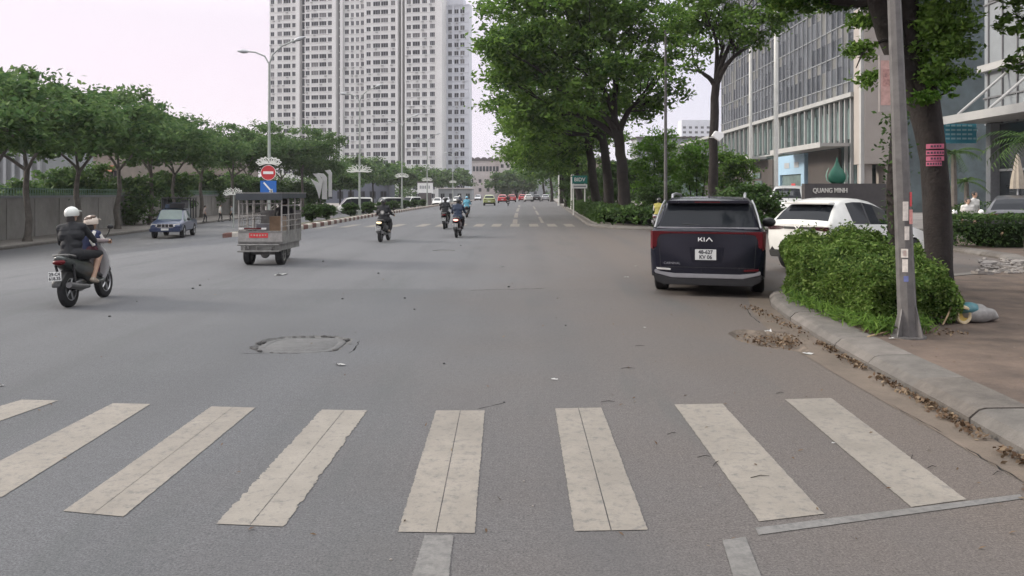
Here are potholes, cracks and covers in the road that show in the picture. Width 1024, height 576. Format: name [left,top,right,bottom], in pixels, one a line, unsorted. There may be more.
pothole [727,329,809,352]
manhole cover [245,335,360,354]
crack [969,450,1024,483]
